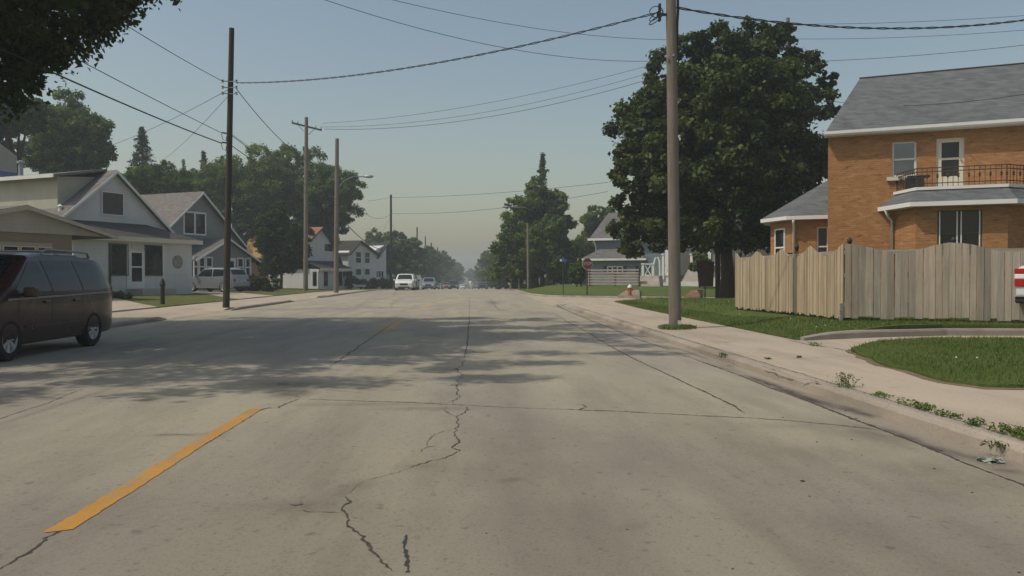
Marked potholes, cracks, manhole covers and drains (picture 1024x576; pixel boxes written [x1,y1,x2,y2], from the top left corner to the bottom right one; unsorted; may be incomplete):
crack [289,360,870,571]
